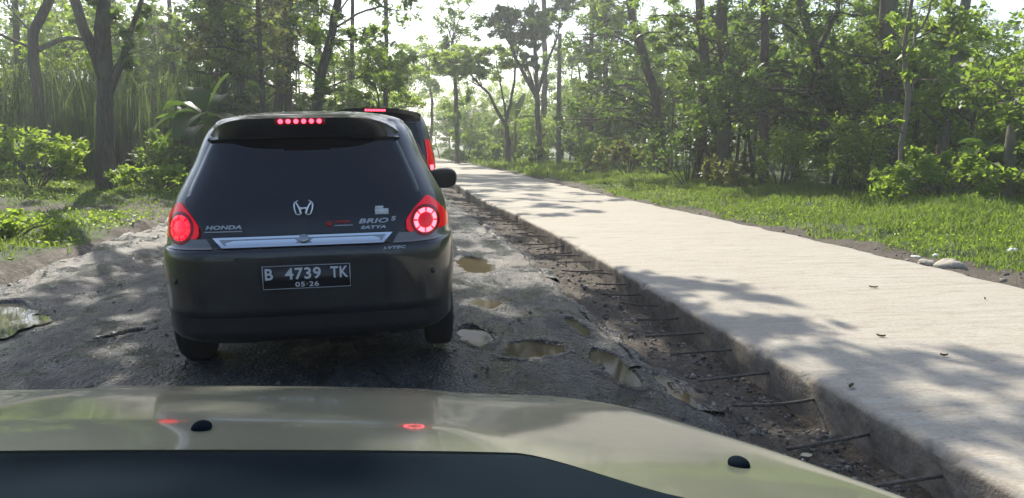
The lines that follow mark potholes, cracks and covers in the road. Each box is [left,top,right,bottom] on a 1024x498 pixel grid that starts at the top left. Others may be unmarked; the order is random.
pothole [491,336,578,361]
pothole [458,297,518,311]
pothole [647,368,705,413]
pothole [453,254,509,275]
pothole [584,345,649,392]
pothole [452,321,504,349]
pothole [558,315,595,338]
